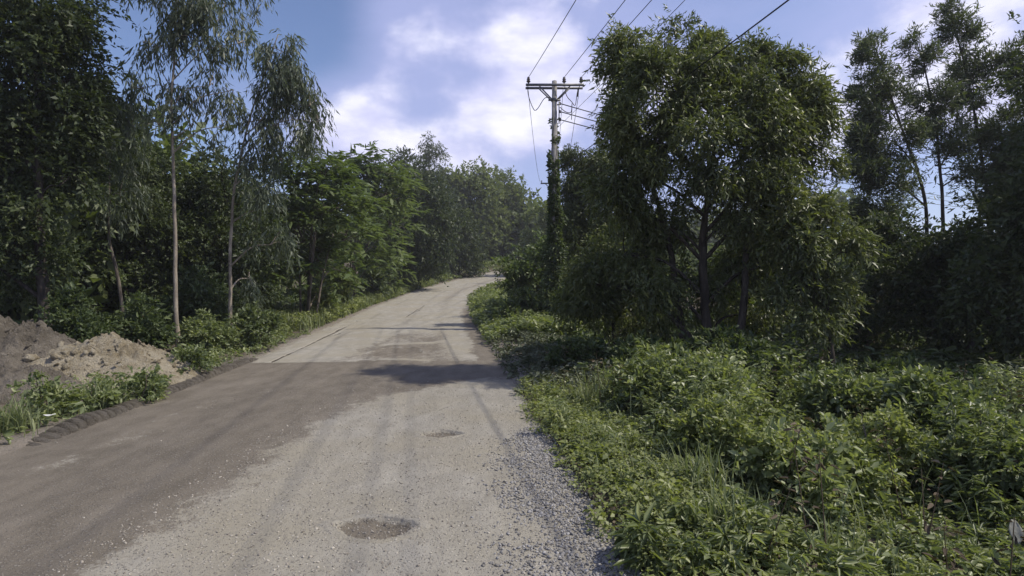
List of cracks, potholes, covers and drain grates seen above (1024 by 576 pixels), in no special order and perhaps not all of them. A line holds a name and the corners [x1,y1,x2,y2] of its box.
pothole [414,428,471,440]
pothole [317,513,431,543]
